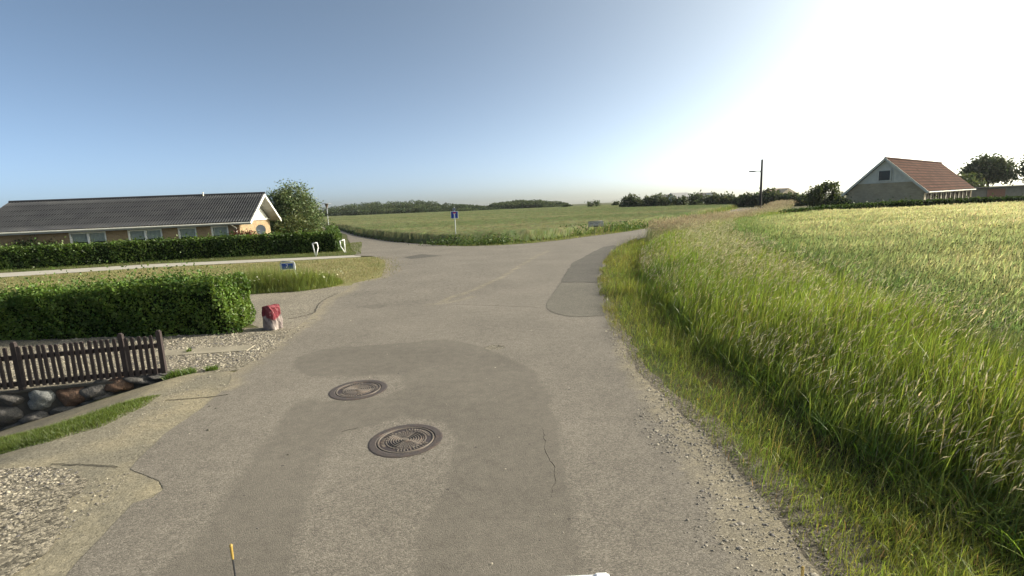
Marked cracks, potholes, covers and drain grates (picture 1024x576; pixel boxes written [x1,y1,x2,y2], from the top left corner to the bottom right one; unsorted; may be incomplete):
manhole cover [368,424,443,458]
manhole cover [329,380,388,400]
